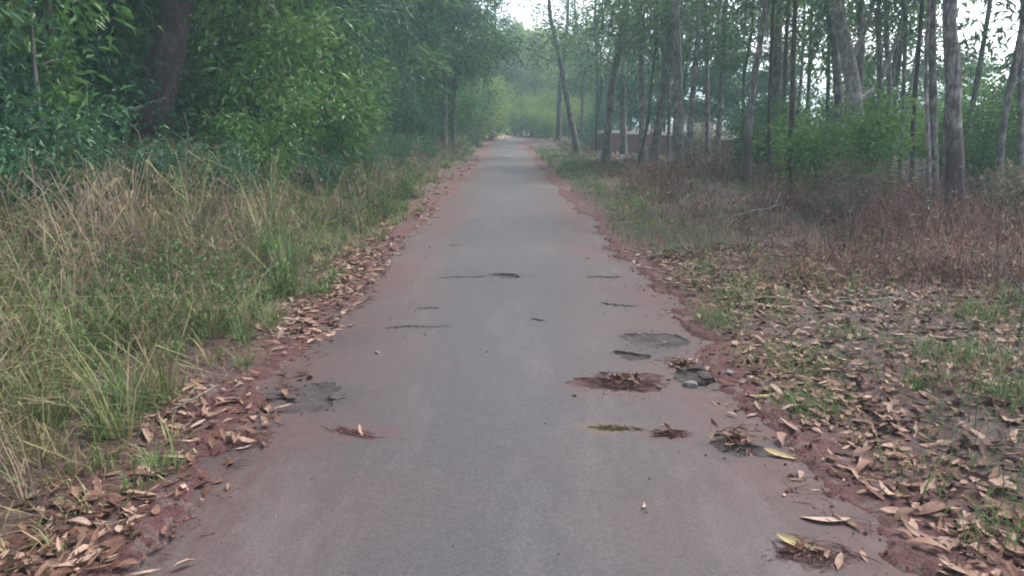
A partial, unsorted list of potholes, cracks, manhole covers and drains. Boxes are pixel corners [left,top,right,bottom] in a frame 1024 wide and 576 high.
pothole [611,350,651,361]
pothole [673,368,716,386]
pothole [565,372,664,393]
pothole [618,333,691,349]
pothole [277,382,342,414]
pothole [709,439,774,457]
